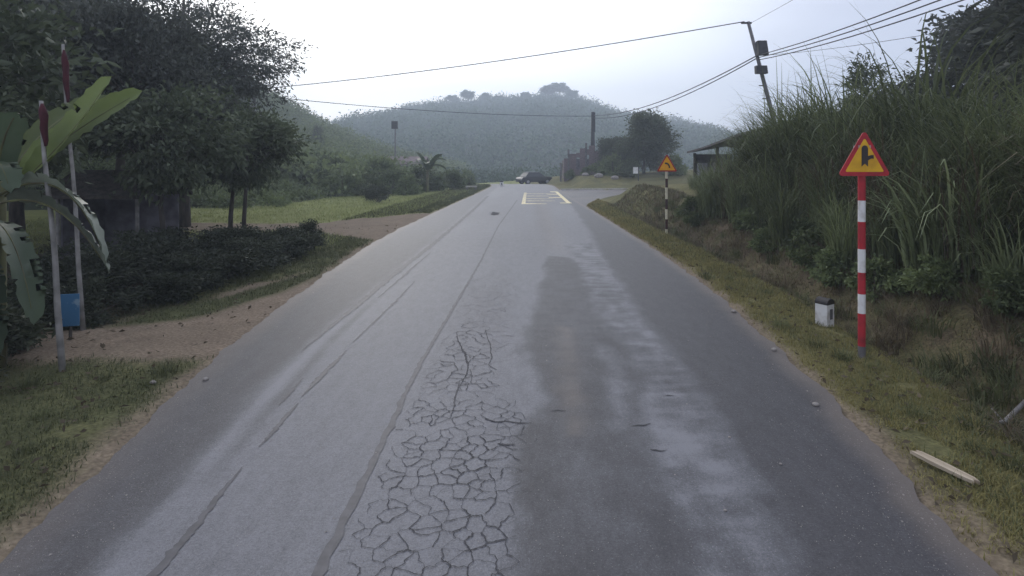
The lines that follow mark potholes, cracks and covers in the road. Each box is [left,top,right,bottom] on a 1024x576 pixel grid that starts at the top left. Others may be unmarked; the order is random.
crack [342,398,537,576]
crack [423,276,519,416]
